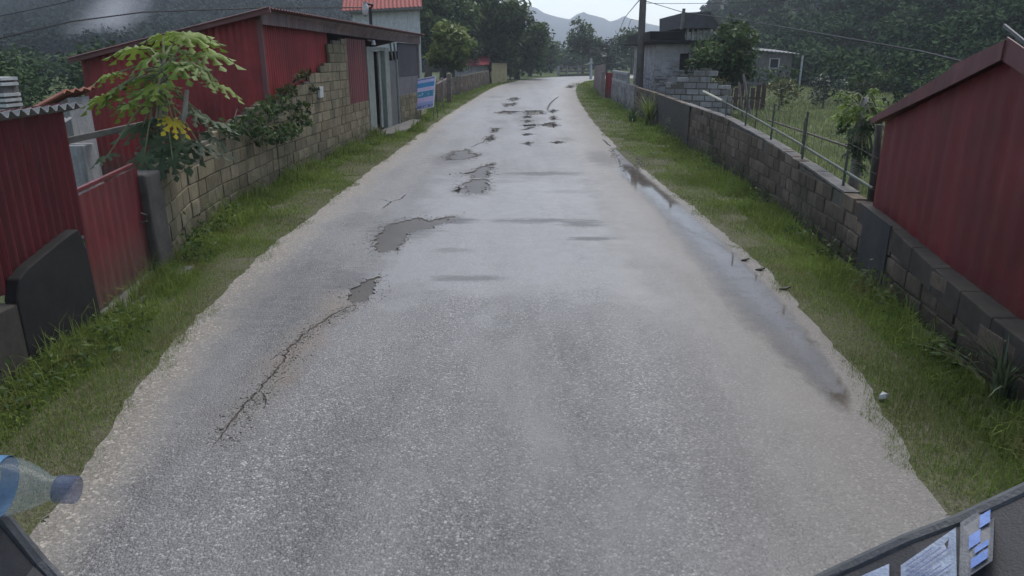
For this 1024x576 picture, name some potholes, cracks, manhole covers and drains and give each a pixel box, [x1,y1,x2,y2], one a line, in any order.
pothole [442,148,483,161]
pothole [449,162,499,180]
pothole [329,271,391,311]
pothole [452,177,498,195]
crack [205,300,375,447]
pothole [354,212,465,259]
